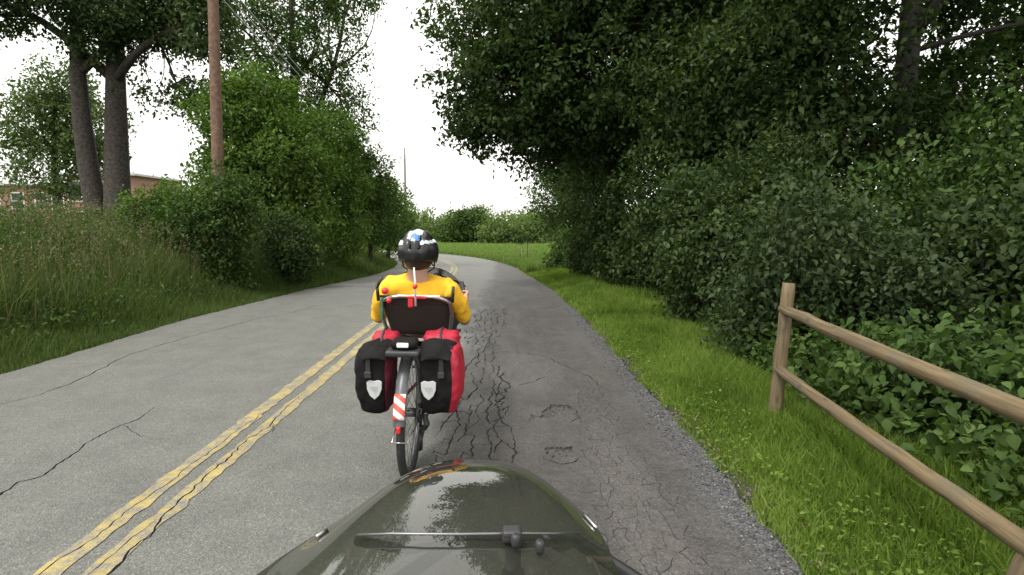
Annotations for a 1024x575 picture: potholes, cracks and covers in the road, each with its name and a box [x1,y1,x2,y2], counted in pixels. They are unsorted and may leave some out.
crack [433,309,598,463]
pothole [545,446,573,458]
pothole [539,404,571,418]
crack [0,406,155,495]
